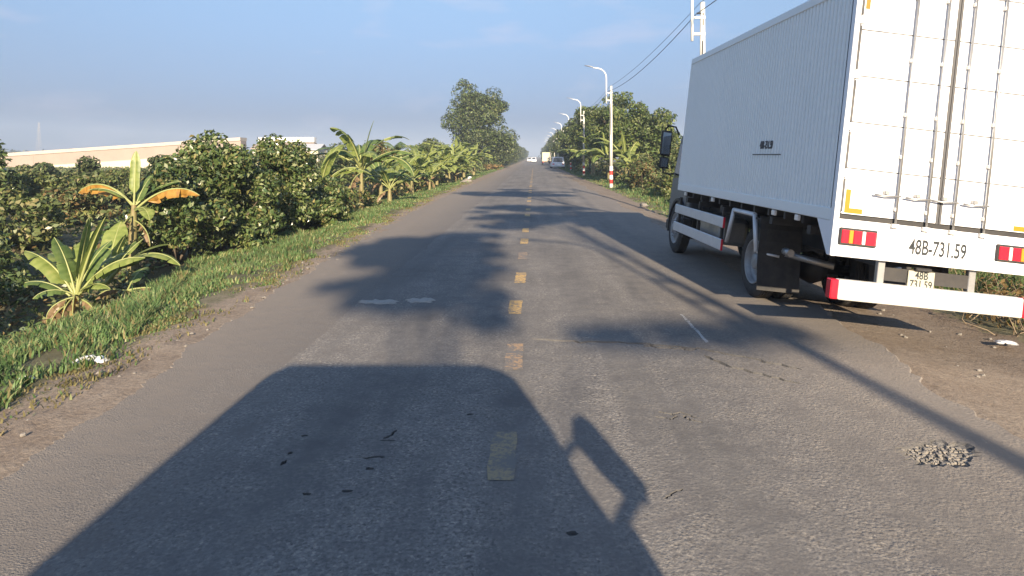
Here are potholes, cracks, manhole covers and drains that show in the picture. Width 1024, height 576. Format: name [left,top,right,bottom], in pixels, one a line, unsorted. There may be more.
crack [536,339,802,384]
pothole [895,439,983,468]
crack [364,430,397,459]
